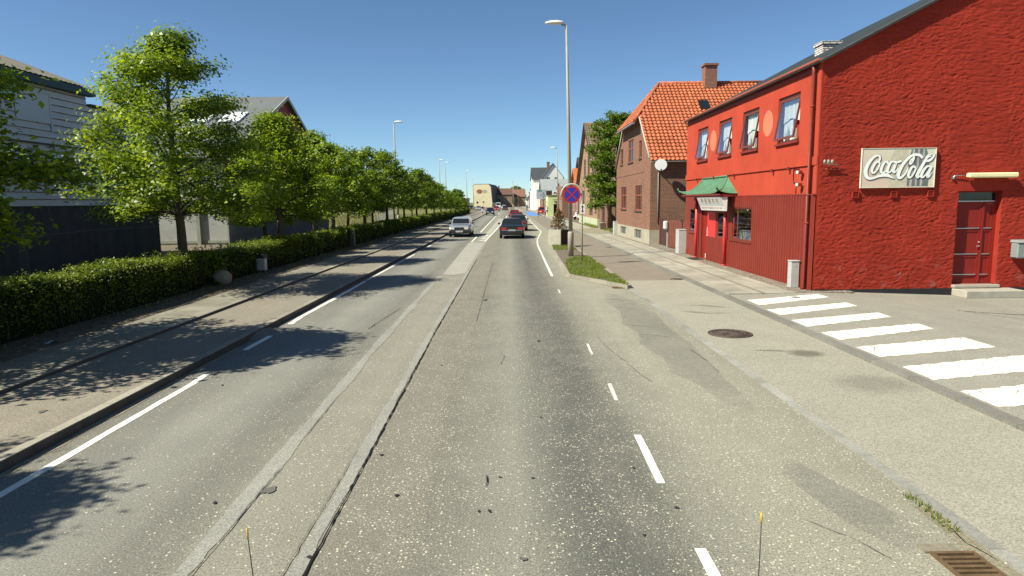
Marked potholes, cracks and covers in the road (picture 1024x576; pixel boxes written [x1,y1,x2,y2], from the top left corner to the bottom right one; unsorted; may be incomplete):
manhole cover [708,329,753,338]
drain grate [930,551,1007,576]
